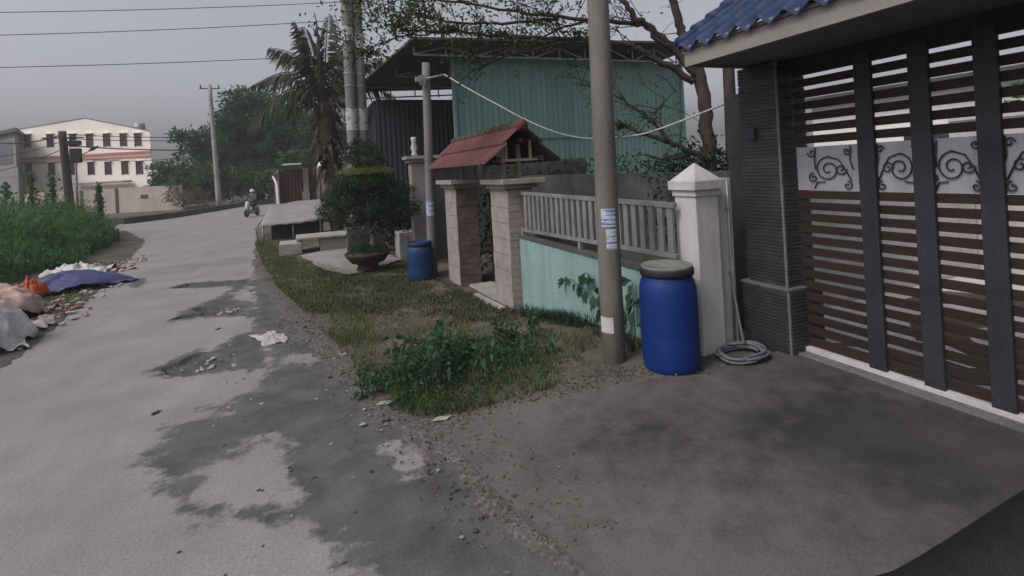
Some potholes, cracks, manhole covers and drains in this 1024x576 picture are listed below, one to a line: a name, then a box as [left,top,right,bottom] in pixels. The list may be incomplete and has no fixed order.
pothole [170,279,256,288]
pothole [161,352,238,377]
pothole [168,305,249,321]
